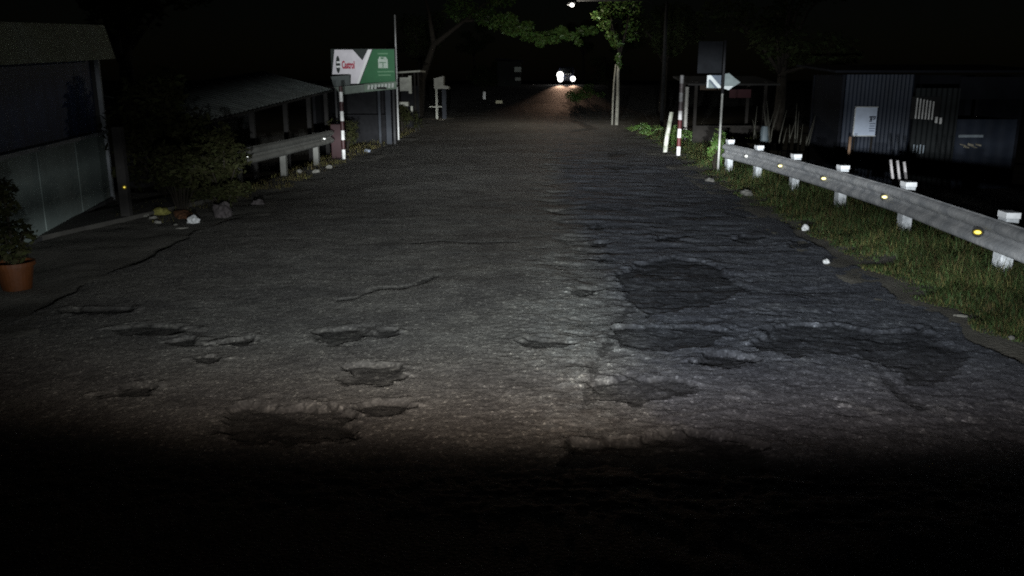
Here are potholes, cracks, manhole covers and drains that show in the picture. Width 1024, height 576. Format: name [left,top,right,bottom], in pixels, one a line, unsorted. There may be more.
pothole [613,255,747,318]
pothole [55,306,139,316]
pothole [351,399,419,417]
pothole [513,335,579,349]
pothole [373,327,401,339]
pothole [584,373,701,408]
pothole [93,383,159,399]
pothole [191,354,223,364]
pothole [334,362,409,388]
pothole [687,349,764,369]
pothole [208,334,261,348]
crack [337,275,439,301]
